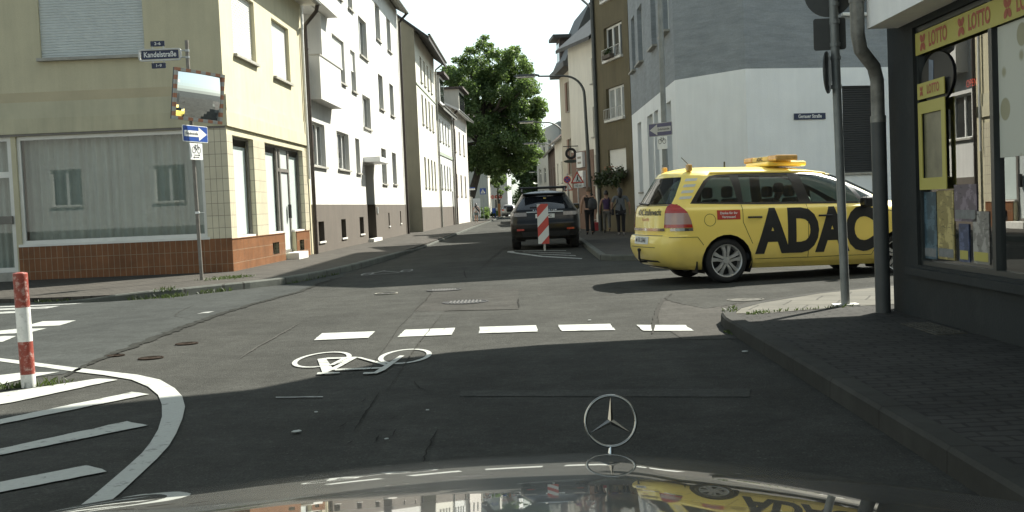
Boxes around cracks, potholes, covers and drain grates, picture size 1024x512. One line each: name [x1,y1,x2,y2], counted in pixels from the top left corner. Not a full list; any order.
crack [318,291,454,445]
crack [239,323,299,359]
